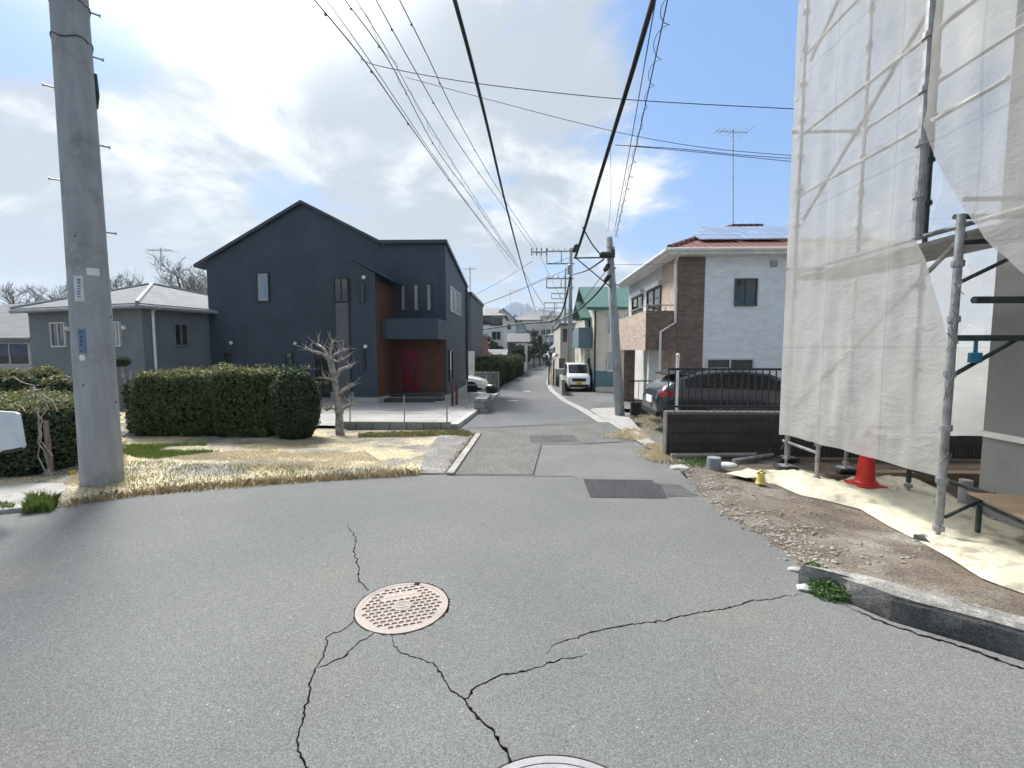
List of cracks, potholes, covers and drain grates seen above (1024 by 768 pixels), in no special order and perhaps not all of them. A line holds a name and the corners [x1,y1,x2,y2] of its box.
crack [391,594,802,764]
crack [296,620,373,768]
manhole cover [353,582,450,636]
manhole cover [501,756,604,768]
crack [349,529,369,590]
